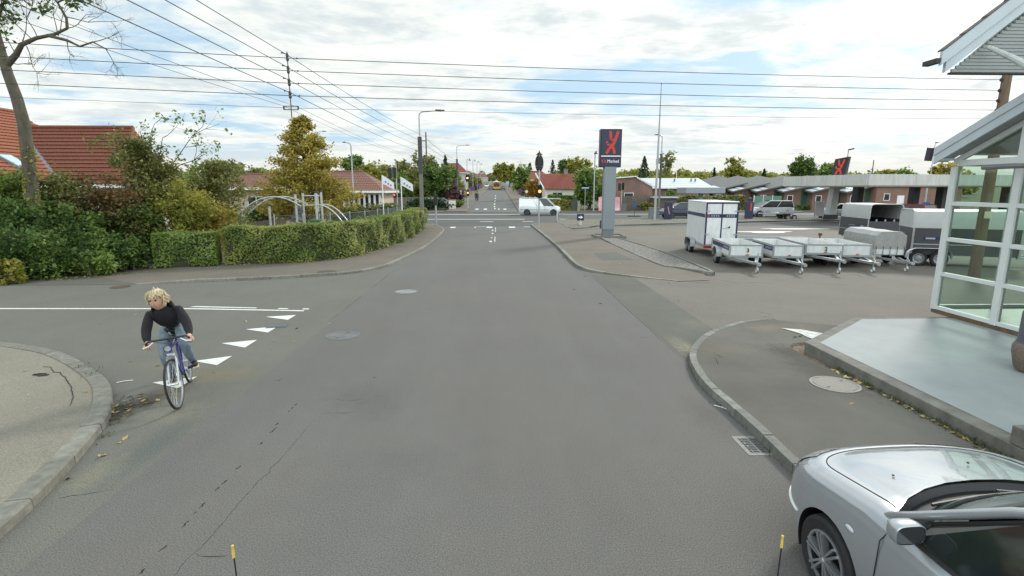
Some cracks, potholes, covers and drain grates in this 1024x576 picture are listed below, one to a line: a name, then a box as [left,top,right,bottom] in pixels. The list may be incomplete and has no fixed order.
manhole cover [325,331,360,340]
drain grate [731,436,773,456]
manhole cover [809,376,862,393]
crack [138,399,362,575]
